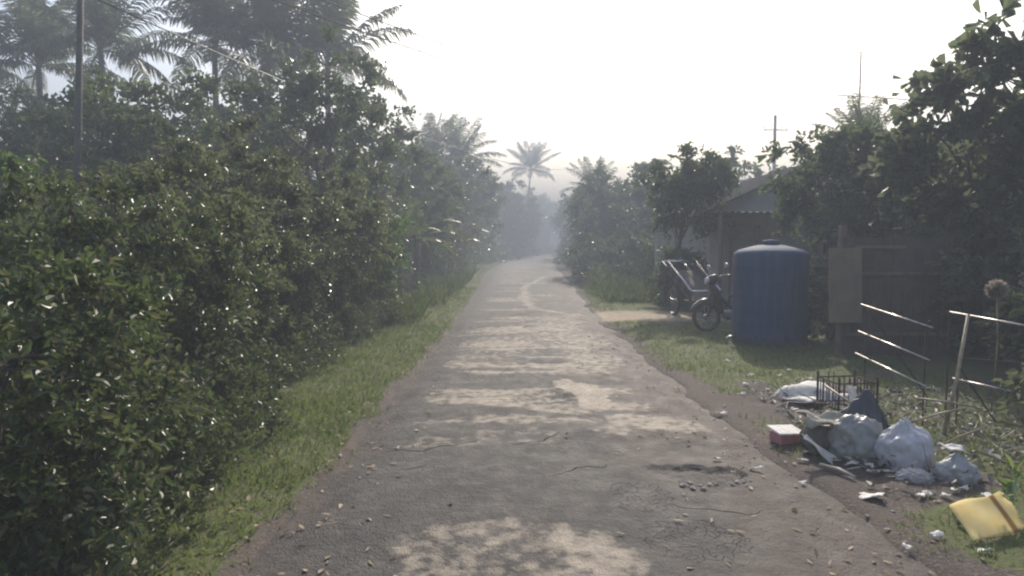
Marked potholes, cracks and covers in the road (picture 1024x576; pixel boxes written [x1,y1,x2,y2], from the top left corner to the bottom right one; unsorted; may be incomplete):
crack [552,464,763,563]
pothole [644,462,754,488]
crack [382,440,478,470]
